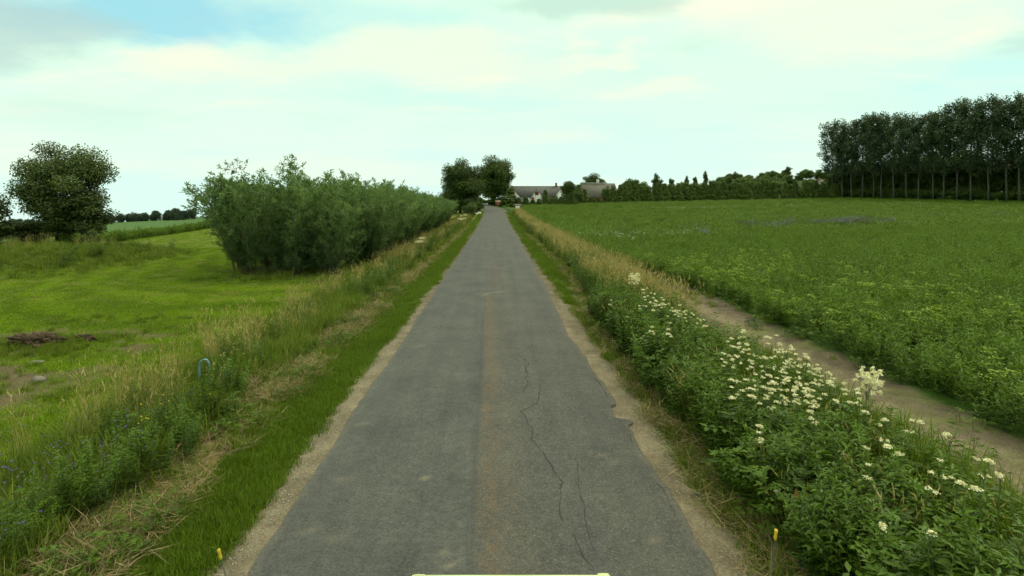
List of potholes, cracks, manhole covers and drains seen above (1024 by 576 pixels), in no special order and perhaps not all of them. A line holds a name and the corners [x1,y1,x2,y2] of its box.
crack [520,344,597,567]
